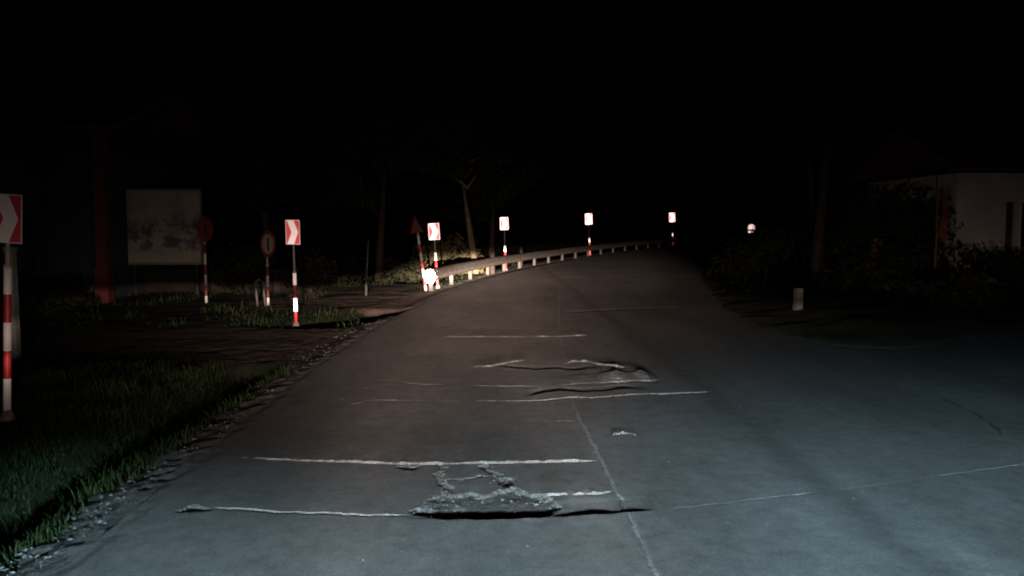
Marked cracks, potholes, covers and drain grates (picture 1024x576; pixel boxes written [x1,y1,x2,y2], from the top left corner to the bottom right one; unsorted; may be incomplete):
pothole [496,476,517,488]
crack [941,398,1003,435]
pothole [408,488,564,520]
